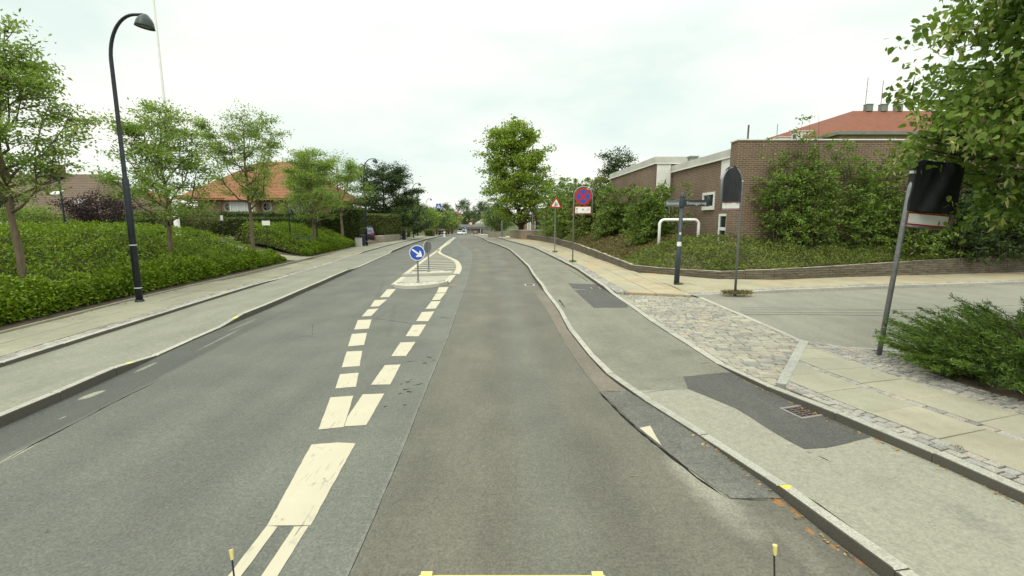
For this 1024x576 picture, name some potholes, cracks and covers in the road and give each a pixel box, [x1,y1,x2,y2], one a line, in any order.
drain grate [779,405,823,419]
